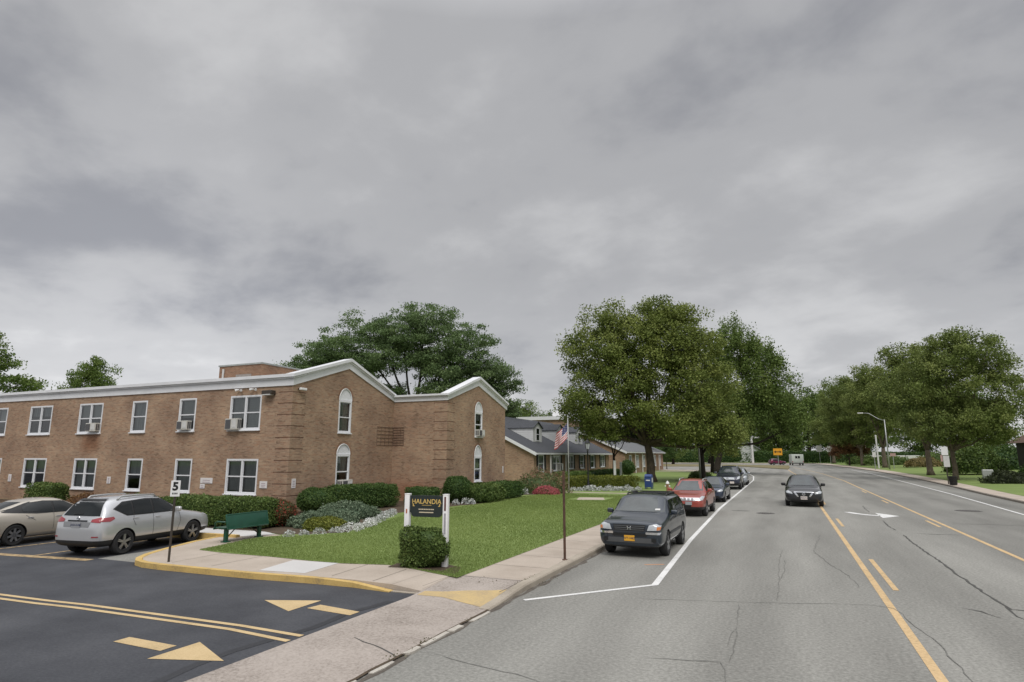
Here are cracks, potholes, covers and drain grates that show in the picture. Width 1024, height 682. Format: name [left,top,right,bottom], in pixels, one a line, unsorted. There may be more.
crack [644,552,973,682]
crack [864,507,1024,619]
